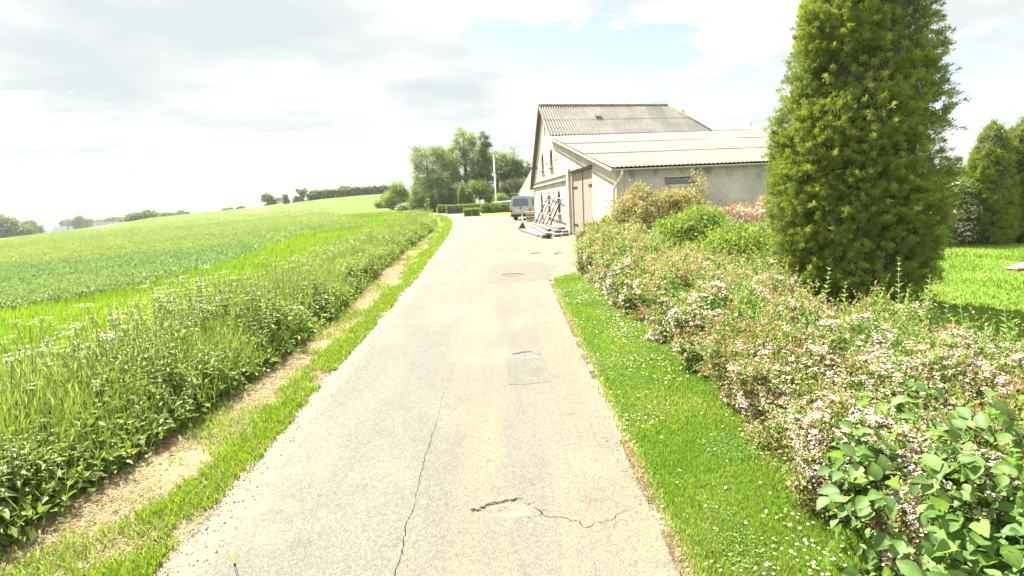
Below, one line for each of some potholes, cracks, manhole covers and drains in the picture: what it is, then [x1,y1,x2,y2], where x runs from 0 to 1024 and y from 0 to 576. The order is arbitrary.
crack [528,507,633,528]
crack [394,378,450,576]
